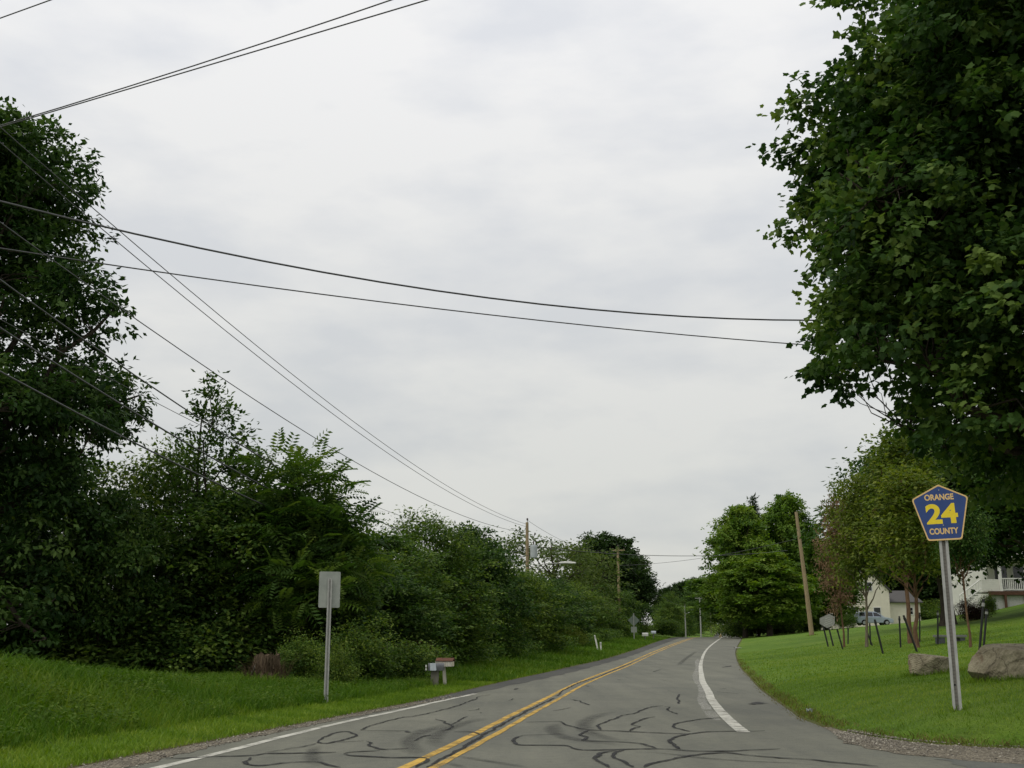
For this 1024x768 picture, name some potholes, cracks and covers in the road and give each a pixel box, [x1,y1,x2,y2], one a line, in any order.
crack [166,695,483,767]
crack [511,694,875,767]
